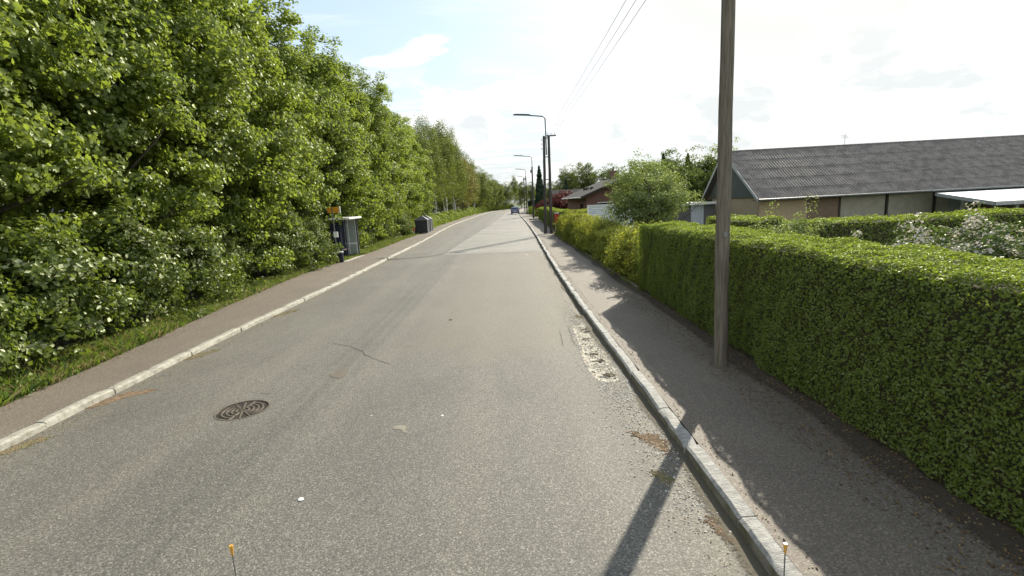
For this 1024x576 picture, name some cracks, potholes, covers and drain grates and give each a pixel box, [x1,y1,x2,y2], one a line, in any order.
pothole [572,324,598,346]
pothole [581,346,610,367]
pothole [588,366,619,382]
manhole cover [214,399,271,421]
